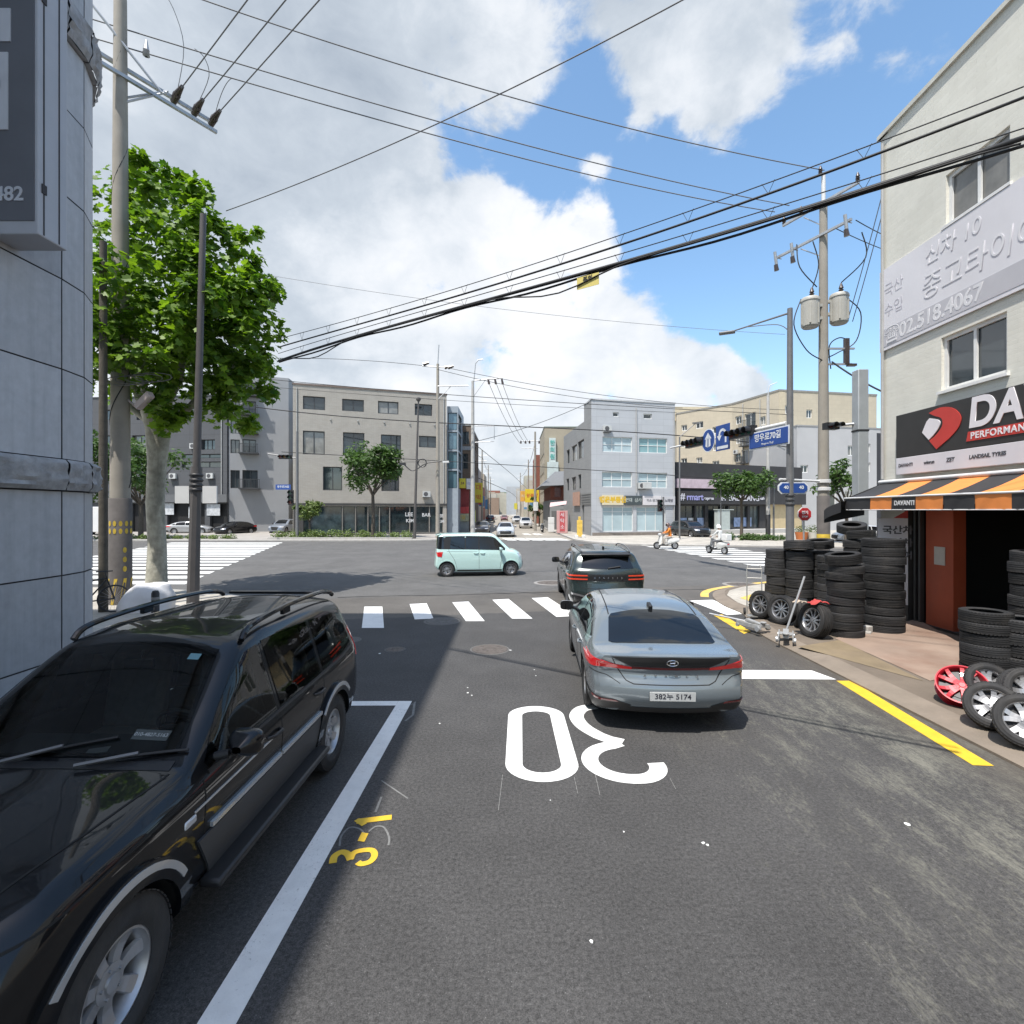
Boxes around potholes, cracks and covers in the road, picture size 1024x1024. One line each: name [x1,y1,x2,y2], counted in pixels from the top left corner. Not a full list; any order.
manhole cover [424,617,460,625]
manhole cover [470,644,510,655]
